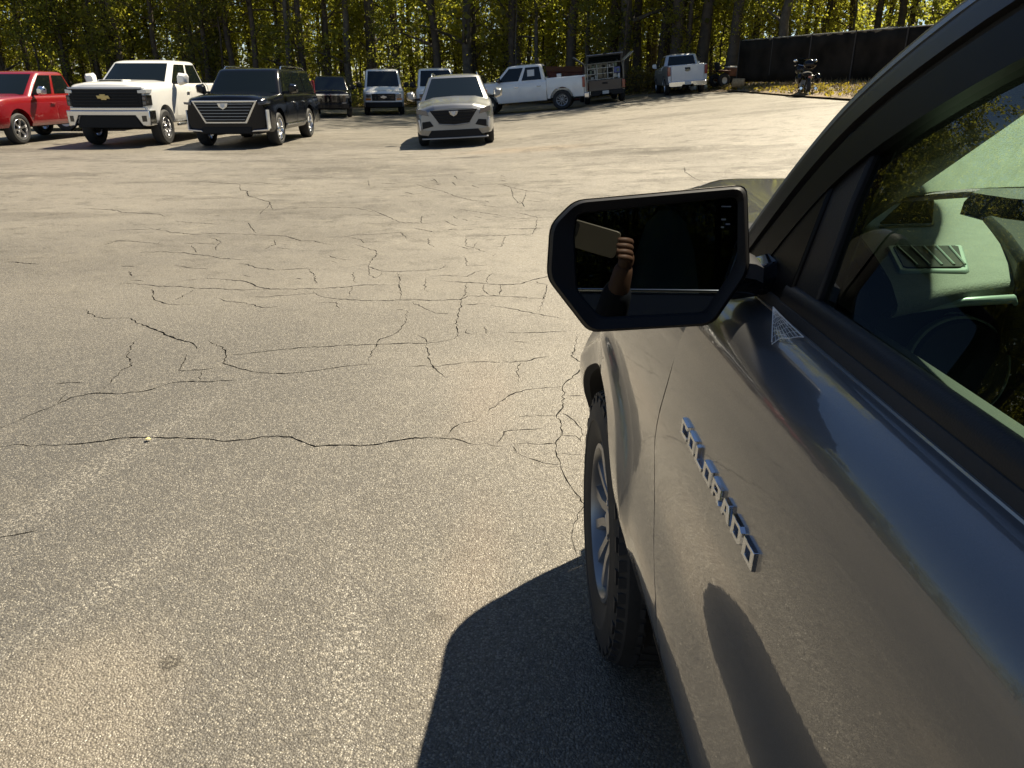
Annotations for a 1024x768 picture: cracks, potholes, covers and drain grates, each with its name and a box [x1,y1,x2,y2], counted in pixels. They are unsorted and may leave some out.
crack [3,336,584,571]
crack [1,176,567,428]
